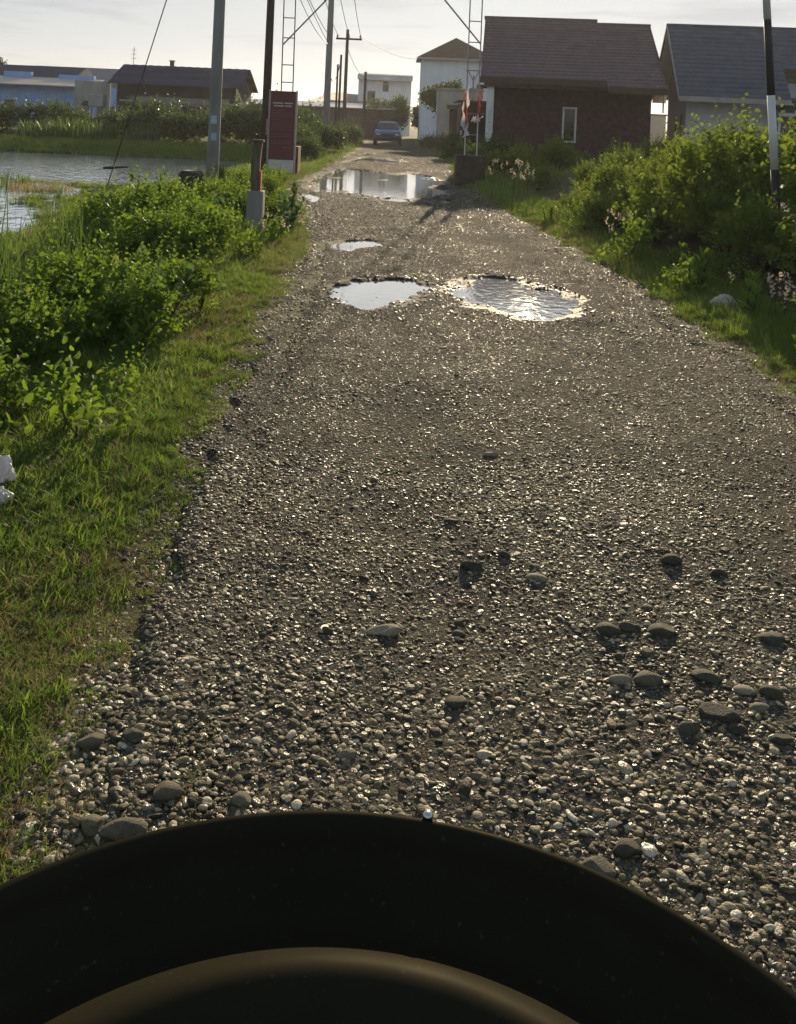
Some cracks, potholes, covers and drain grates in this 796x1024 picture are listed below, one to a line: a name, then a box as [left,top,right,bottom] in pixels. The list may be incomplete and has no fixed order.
pothole [319,277,438,310]
pothole [298,167,468,205]
pothole [438,274,591,321]
pothole [328,237,390,252]
